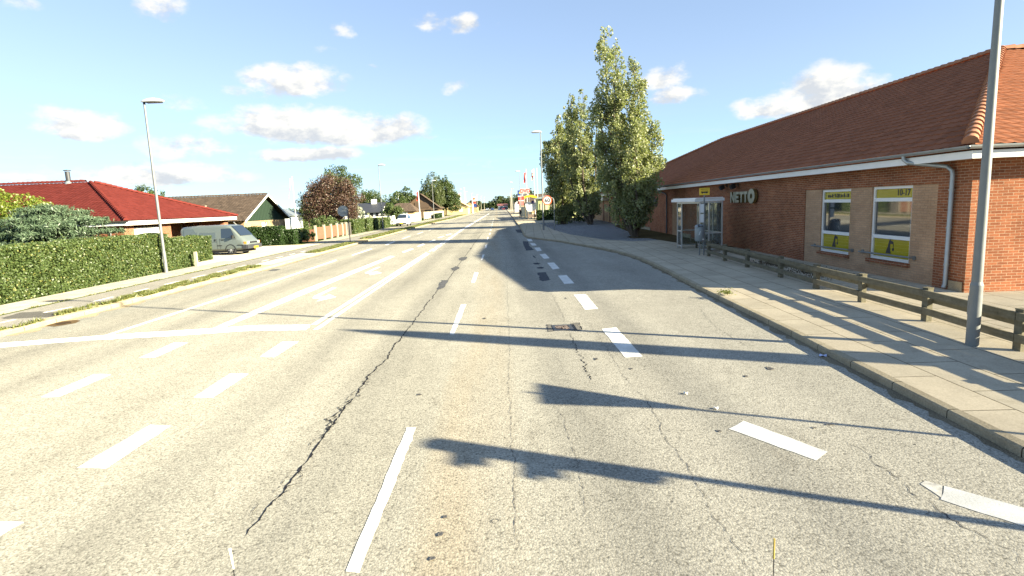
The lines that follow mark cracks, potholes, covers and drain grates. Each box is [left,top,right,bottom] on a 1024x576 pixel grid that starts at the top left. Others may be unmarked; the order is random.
crack [243,235,481,539]
crack [547,296,595,384]
